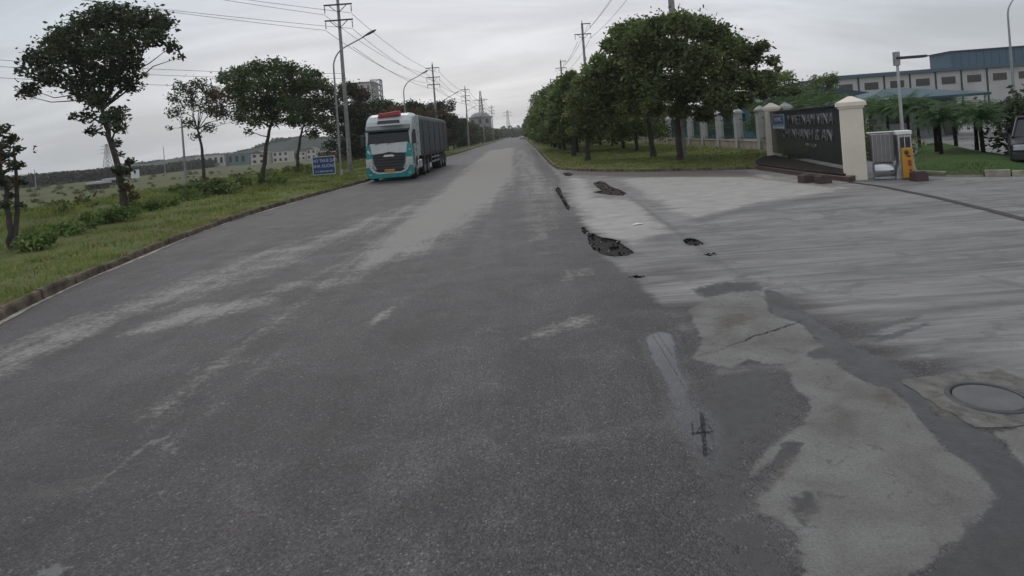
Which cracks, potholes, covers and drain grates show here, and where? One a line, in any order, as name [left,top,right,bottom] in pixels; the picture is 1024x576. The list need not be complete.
manhole cover [902,372,1024,428]
pothole [684,238,704,246]
pothole [587,233,634,257]
pothole [594,181,626,196]
pothole [555,187,570,211]
